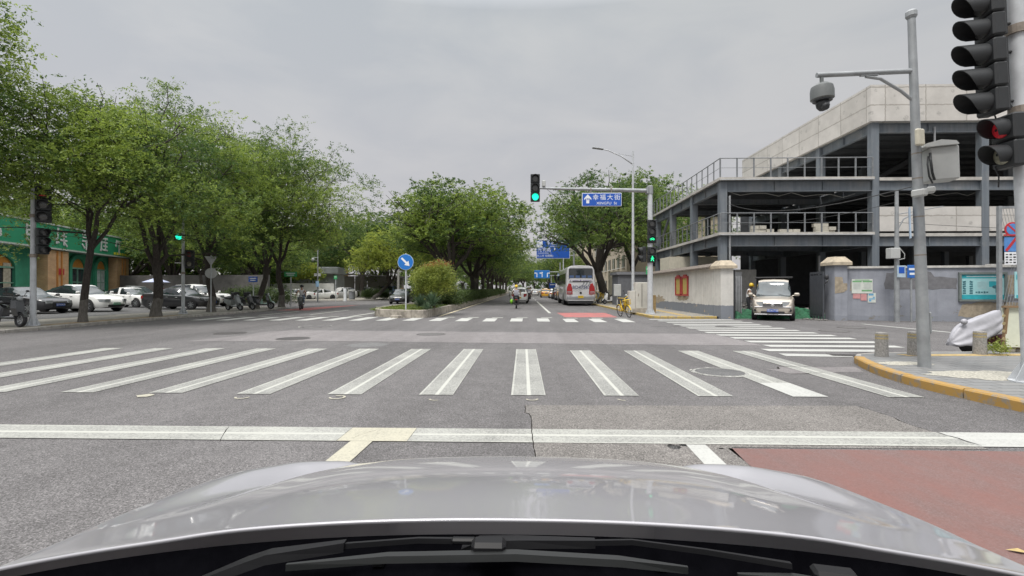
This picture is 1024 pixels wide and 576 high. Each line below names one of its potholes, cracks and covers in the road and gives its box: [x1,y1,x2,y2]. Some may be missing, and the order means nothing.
crack [524,406,536,457]
